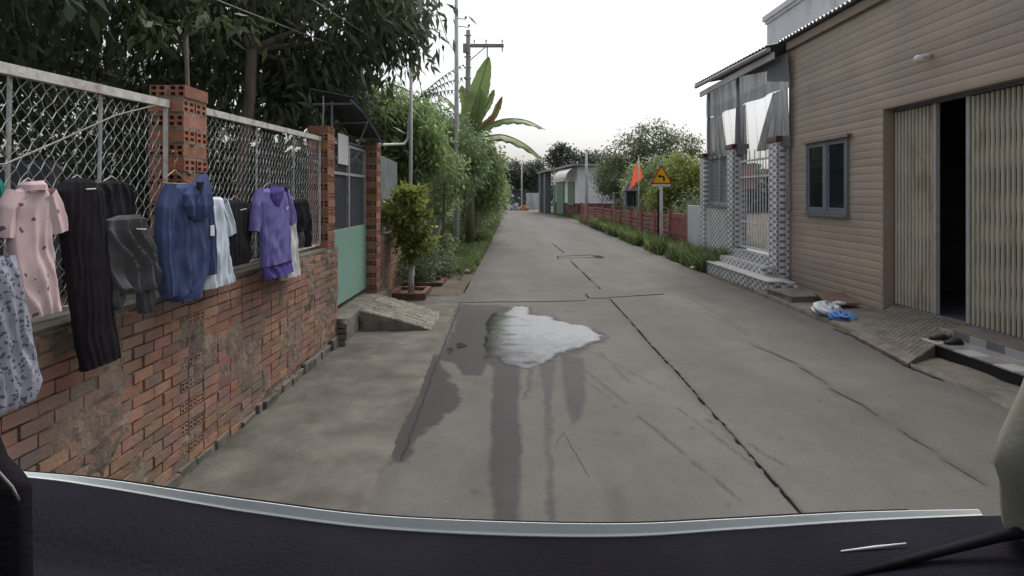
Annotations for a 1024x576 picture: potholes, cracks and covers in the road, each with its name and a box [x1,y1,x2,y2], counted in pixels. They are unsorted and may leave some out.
crack [552,243,802,513]
crack [757,346,983,483]
